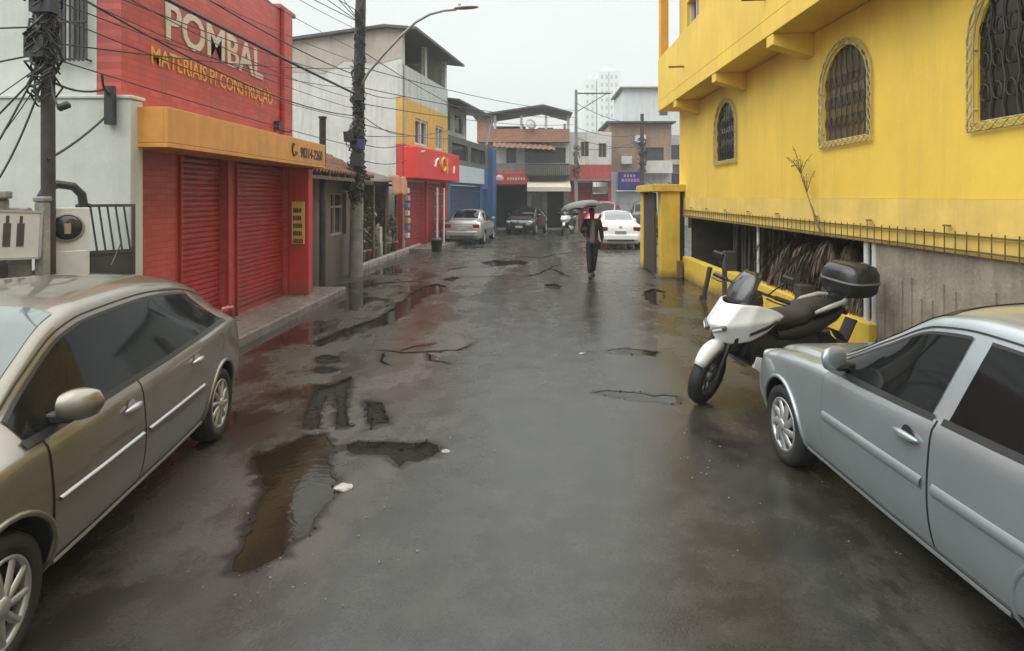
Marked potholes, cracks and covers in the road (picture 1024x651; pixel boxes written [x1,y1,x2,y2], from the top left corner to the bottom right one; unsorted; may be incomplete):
pothole [316,355,339,364]
crack [520,252,576,277]
pothole [643,289,665,305]
pothole [300,377,354,429]
pothole [363,401,390,430]
pothole [224,434,339,574]
pothole [317,283,446,346]
pothole [347,439,441,467]
pothole [608,347,660,357]
crack [377,344,472,365]
pothole [590,390,682,405]
